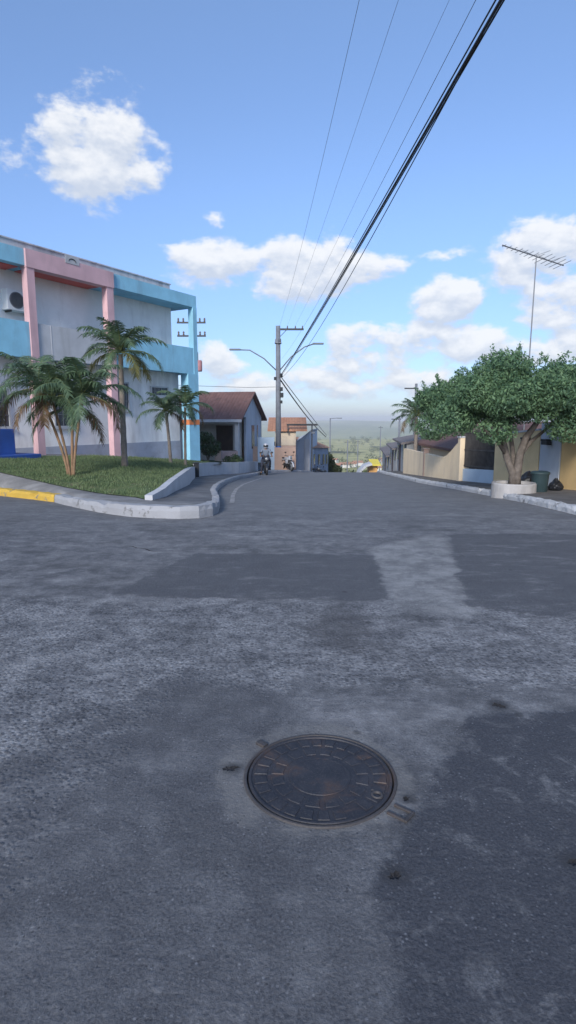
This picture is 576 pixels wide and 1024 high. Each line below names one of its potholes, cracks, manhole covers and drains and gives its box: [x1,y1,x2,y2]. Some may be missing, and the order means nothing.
manhole cover [244,734,415,829]
